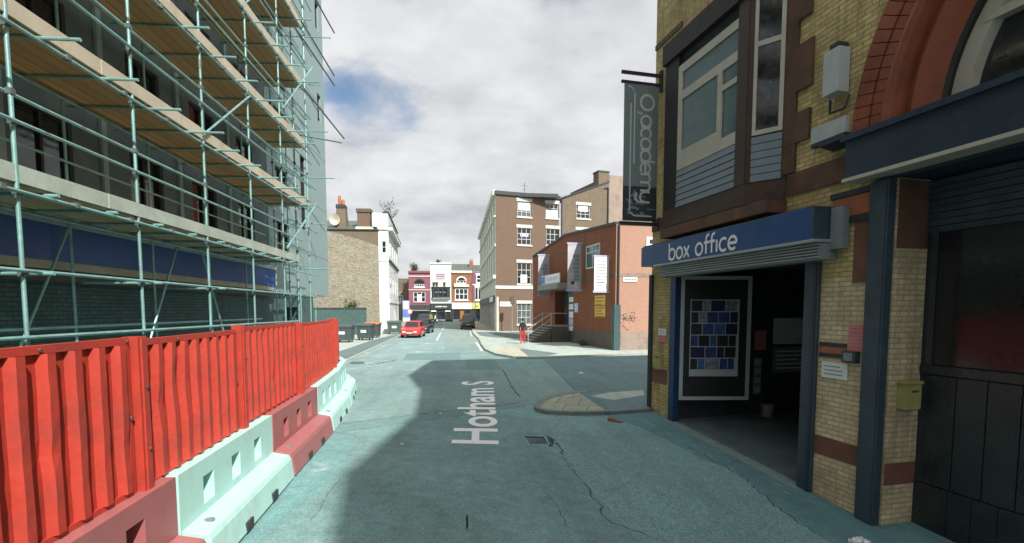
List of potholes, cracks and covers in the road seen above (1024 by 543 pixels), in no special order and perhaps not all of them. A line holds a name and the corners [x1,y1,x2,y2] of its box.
crack [550,437,647,535]
